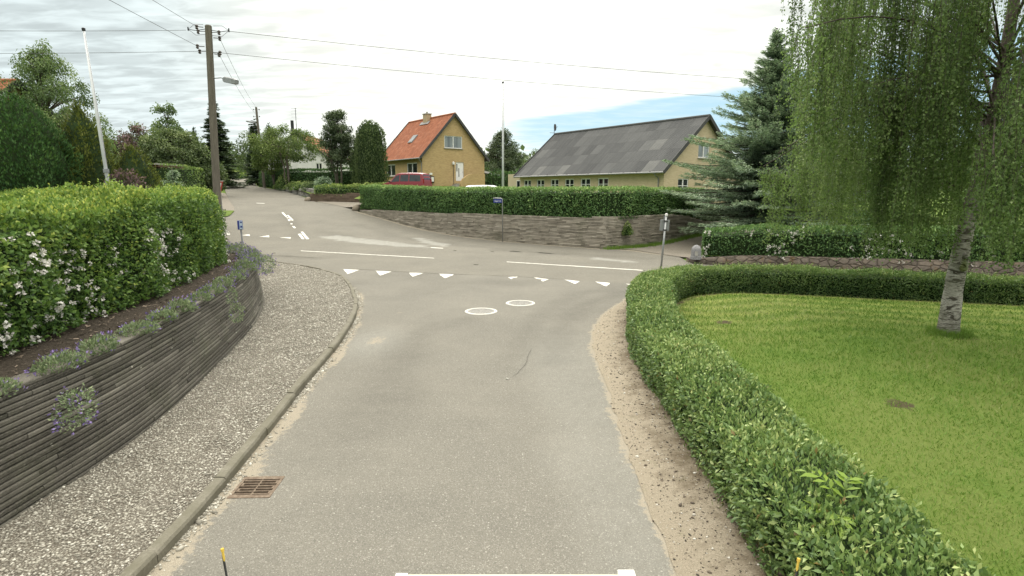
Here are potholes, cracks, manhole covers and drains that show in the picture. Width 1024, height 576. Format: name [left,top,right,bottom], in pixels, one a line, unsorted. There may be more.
drain grate [227,476,285,499]
